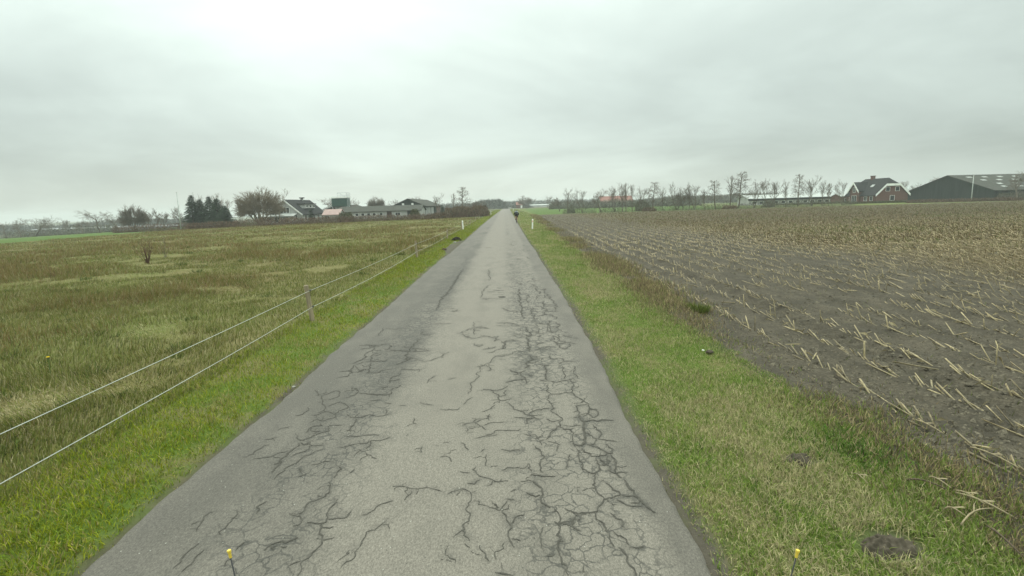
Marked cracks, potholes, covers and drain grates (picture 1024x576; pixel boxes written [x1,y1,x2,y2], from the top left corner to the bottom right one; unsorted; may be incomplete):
crack [173,510,246,572]
crack [243,270,656,575]
